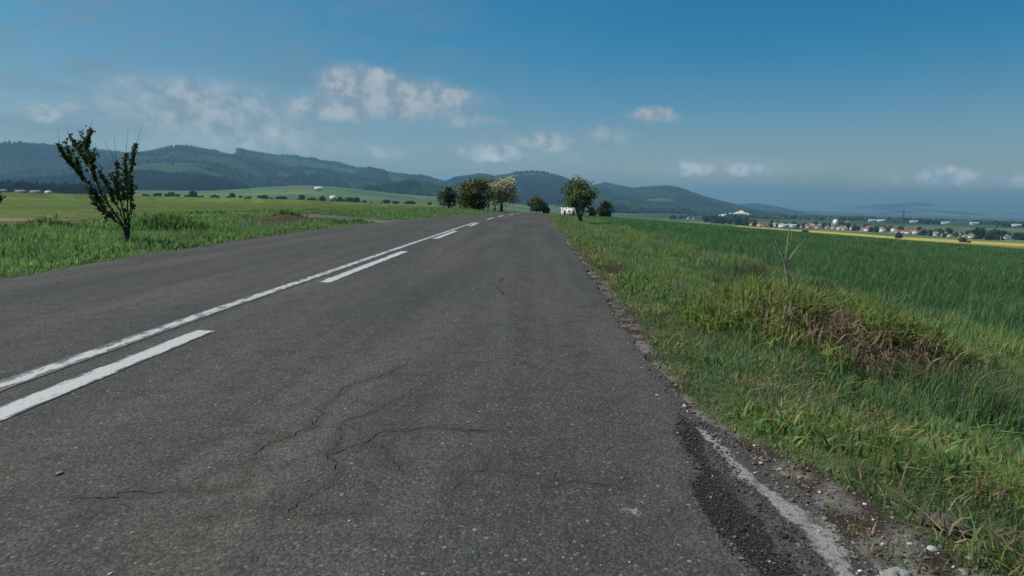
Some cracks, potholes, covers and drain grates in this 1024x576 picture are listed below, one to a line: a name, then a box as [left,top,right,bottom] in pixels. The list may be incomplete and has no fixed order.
crack [68,366,406,518]
crack [453,454,623,504]
crack [256,395,498,516]
